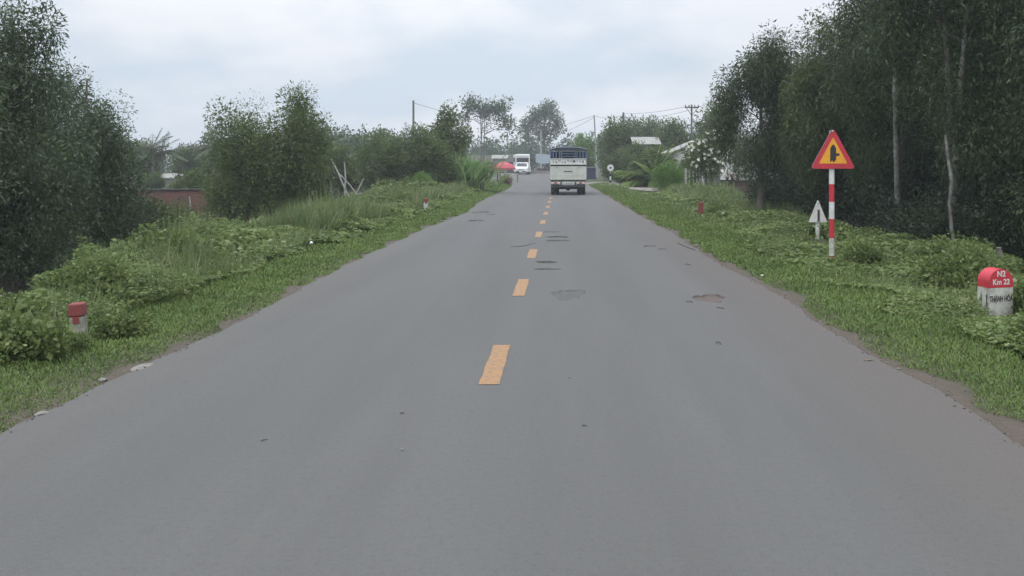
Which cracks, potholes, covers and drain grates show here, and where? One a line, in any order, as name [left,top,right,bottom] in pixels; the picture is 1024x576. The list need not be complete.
pothole [551,290,586,301]
pothole [692,294,725,303]
